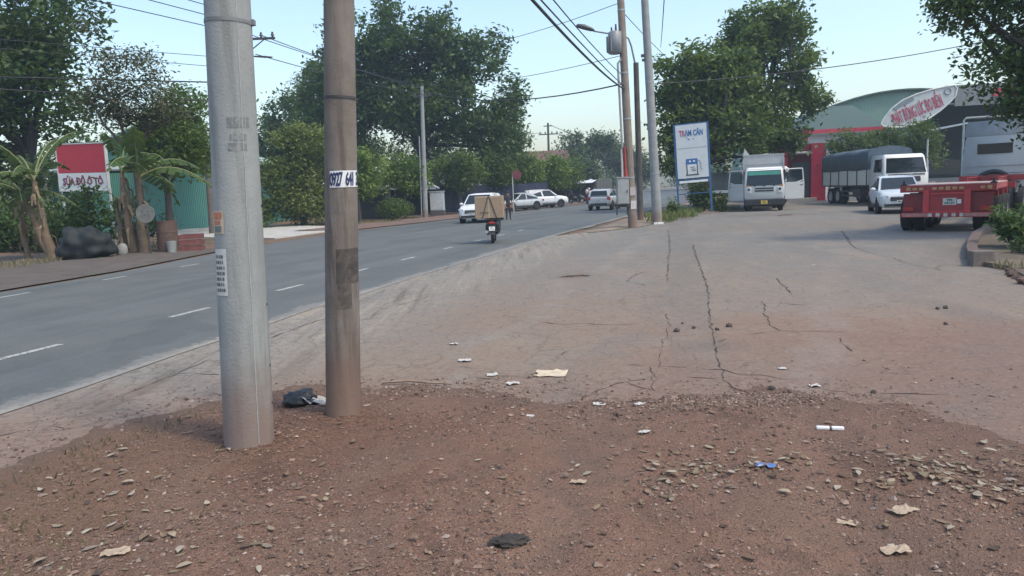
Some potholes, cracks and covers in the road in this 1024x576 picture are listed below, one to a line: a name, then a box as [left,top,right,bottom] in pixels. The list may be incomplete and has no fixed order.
crack [460,234,791,405]
crack [754,278,852,351]
